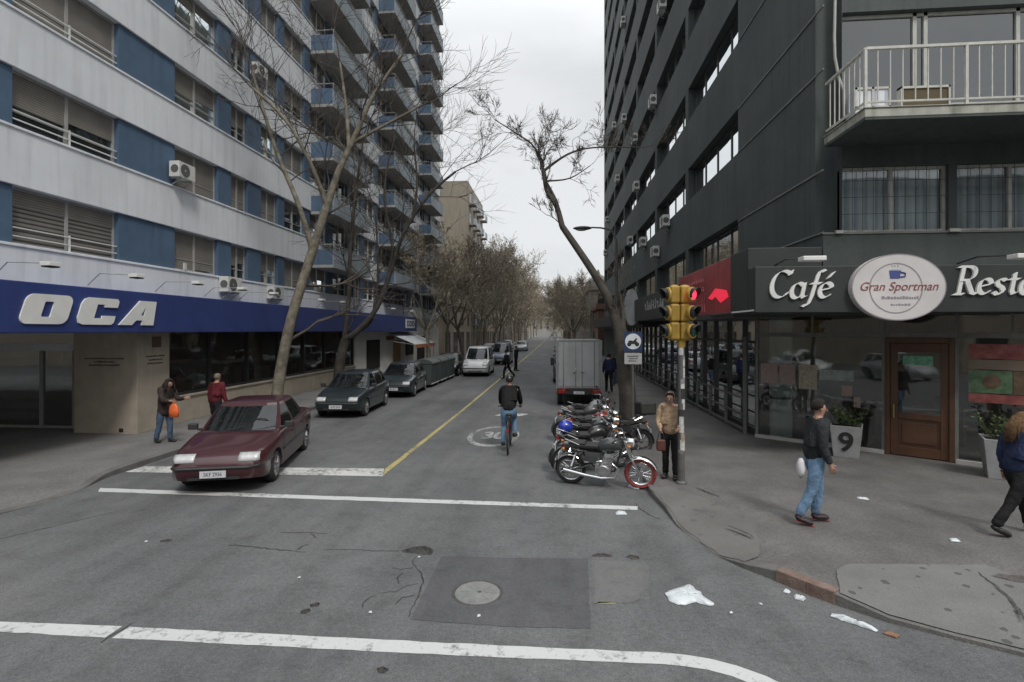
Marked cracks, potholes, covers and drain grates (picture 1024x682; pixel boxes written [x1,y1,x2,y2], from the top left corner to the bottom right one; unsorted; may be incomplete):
manhole cover [452,580,503,606]
pothole [401,546,433,555]
crack [230,532,424,617]
